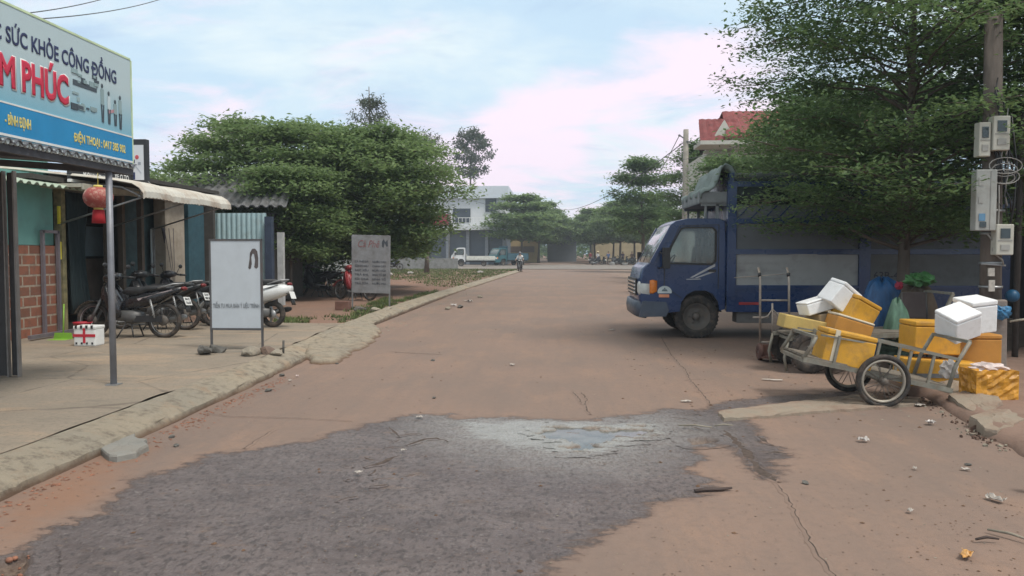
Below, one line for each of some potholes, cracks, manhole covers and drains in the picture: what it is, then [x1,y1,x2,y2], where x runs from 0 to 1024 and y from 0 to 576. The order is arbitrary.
crack [571,391,593,415]
crack [660,337,712,432]
pothole [518,421,674,458]
crack [772,482,840,576]
